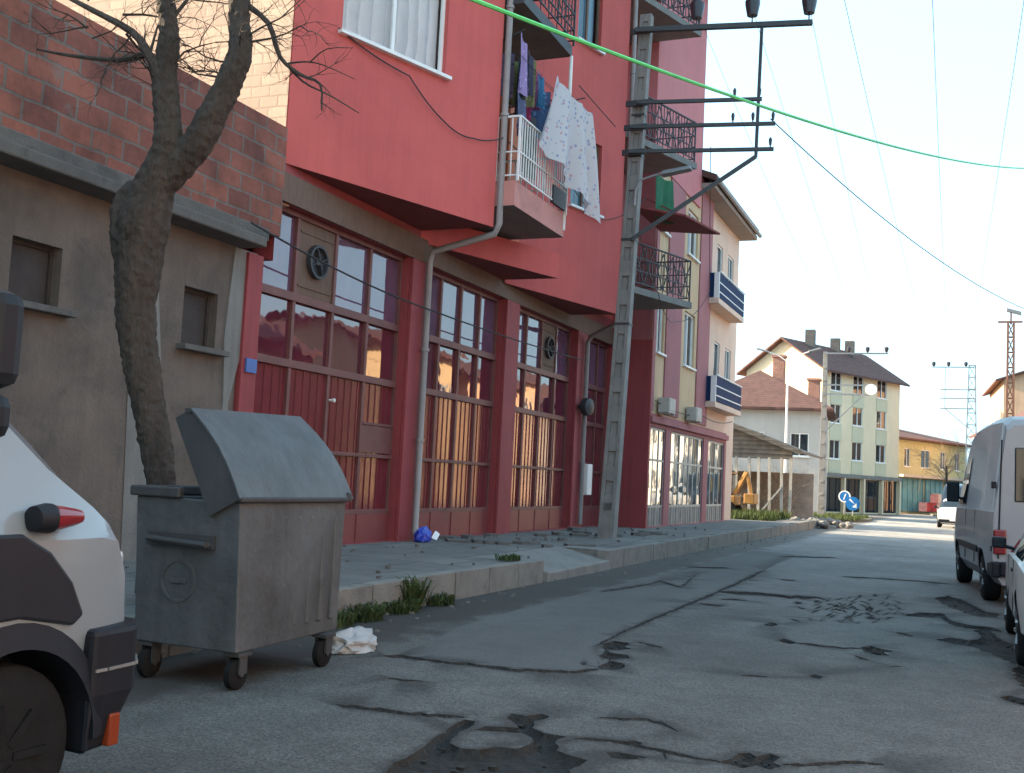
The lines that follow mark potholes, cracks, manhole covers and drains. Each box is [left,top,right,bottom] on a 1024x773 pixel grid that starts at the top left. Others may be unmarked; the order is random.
crack [573,717,720,764]
pothole [598,641,630,670]
crack [383,567,946,681]
pothole [386,714,587,773]
crack [335,704,465,718]
